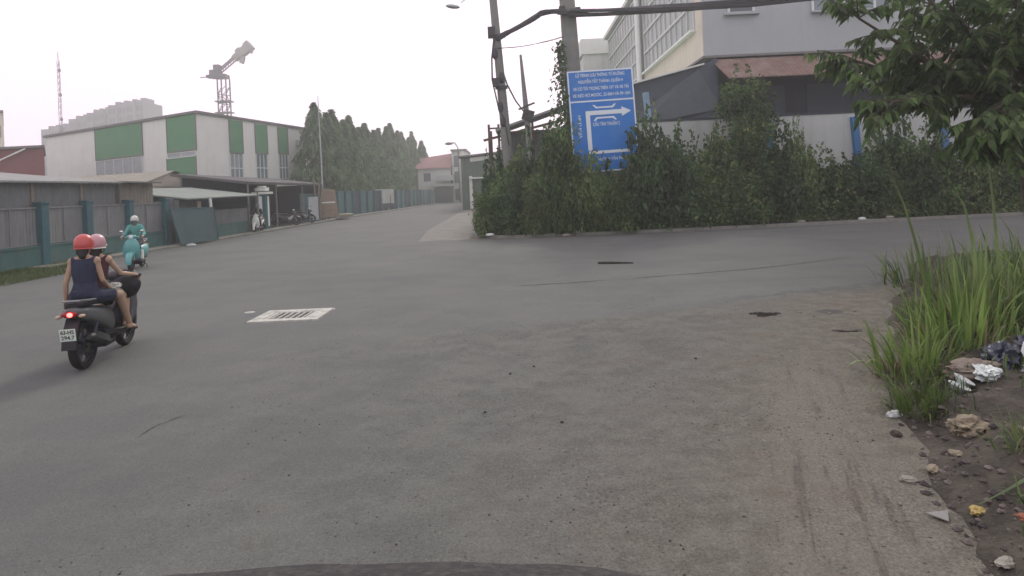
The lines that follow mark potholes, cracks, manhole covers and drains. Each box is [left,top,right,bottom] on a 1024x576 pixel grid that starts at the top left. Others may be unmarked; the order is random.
drain grate [245,308,334,324]
pothole [742,310,790,318]
